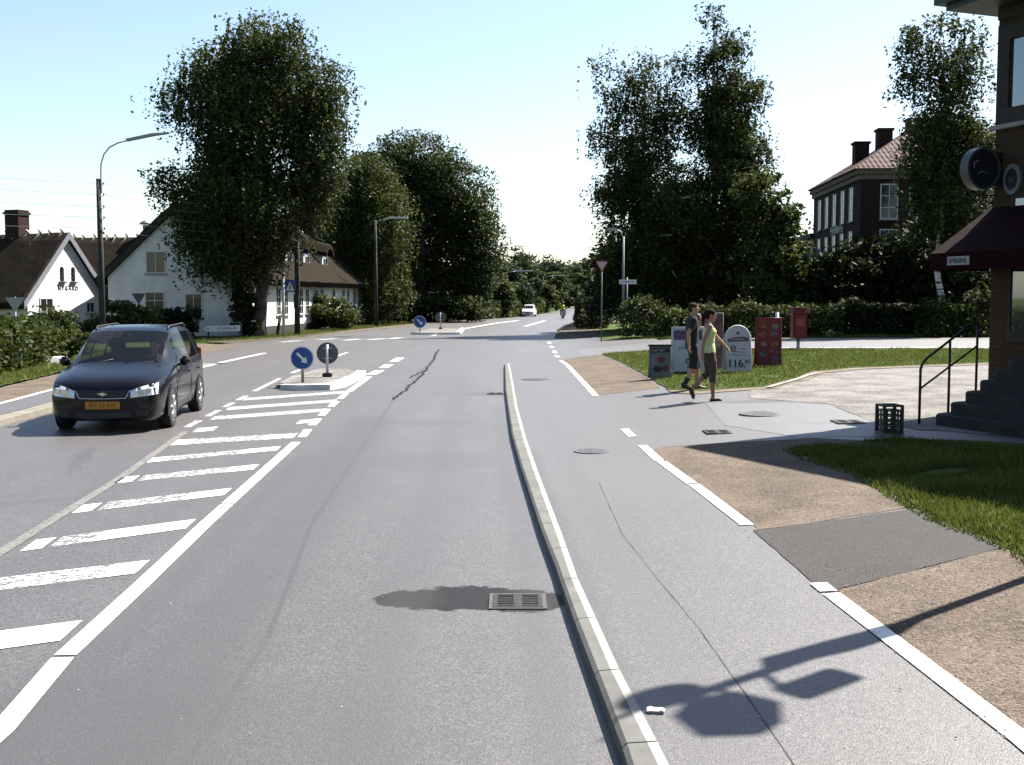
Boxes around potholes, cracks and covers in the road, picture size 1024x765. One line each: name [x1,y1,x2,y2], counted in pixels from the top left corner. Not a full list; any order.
drain grate [489,593,547,610]
crack [392,349,440,400]
